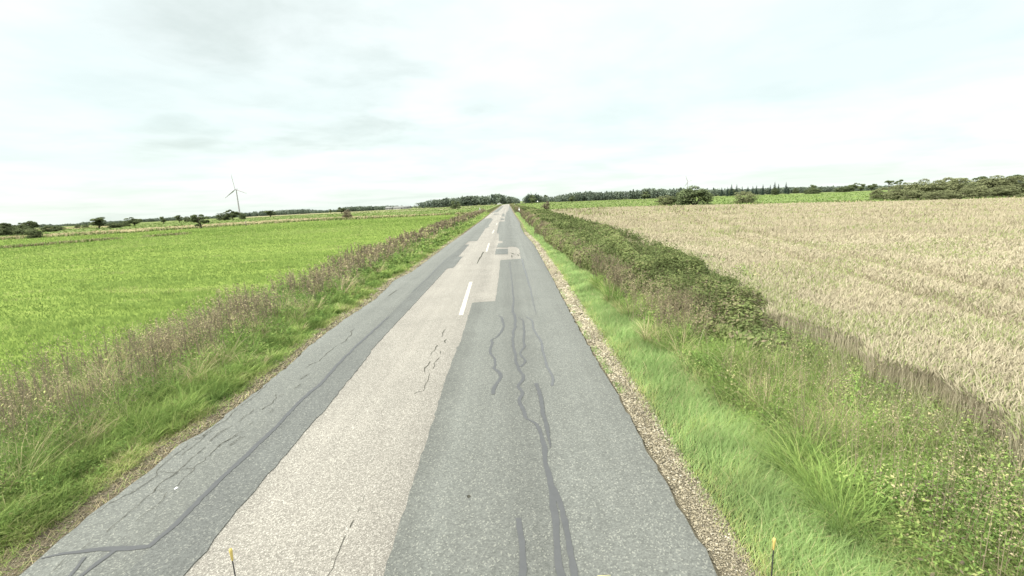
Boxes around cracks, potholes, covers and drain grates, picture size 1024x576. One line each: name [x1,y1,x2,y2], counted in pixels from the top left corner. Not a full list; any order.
crack [54,328,355,570]
